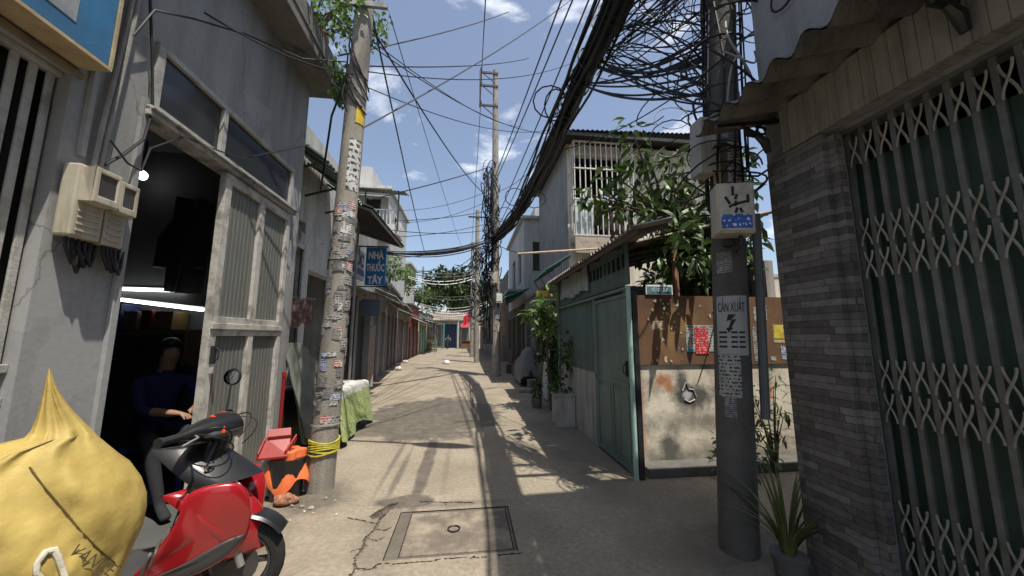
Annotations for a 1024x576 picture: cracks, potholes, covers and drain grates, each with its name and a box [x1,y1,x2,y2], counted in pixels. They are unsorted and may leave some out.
manhole cover [383,507,517,561]
crack [348,512,523,576]
